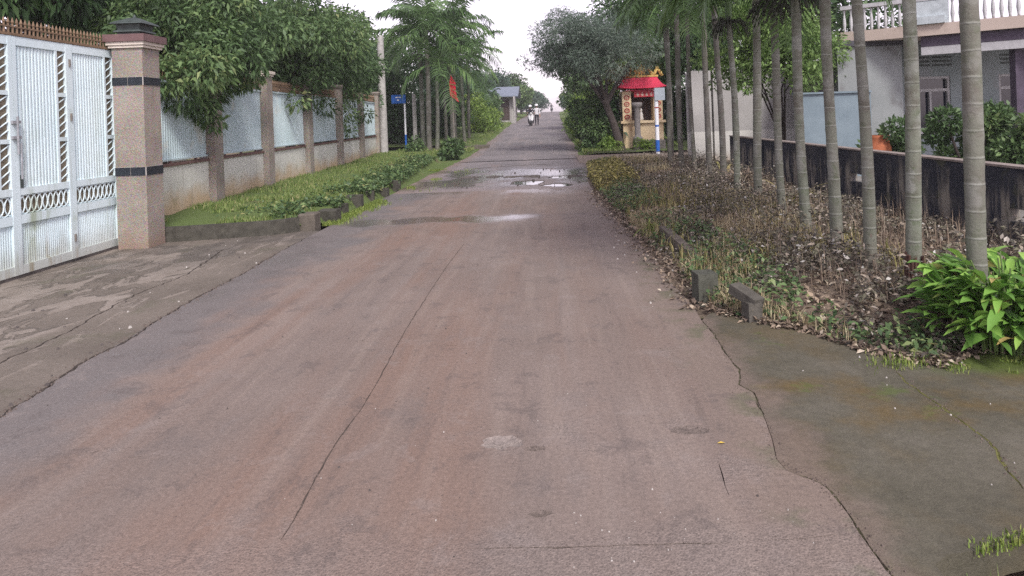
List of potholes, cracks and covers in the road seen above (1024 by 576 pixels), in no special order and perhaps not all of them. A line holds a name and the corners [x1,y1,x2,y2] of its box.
crack [702,321,765,415]
crack [0,238,305,418]
crack [282,244,464,538]
crack [799,475,893,576]
